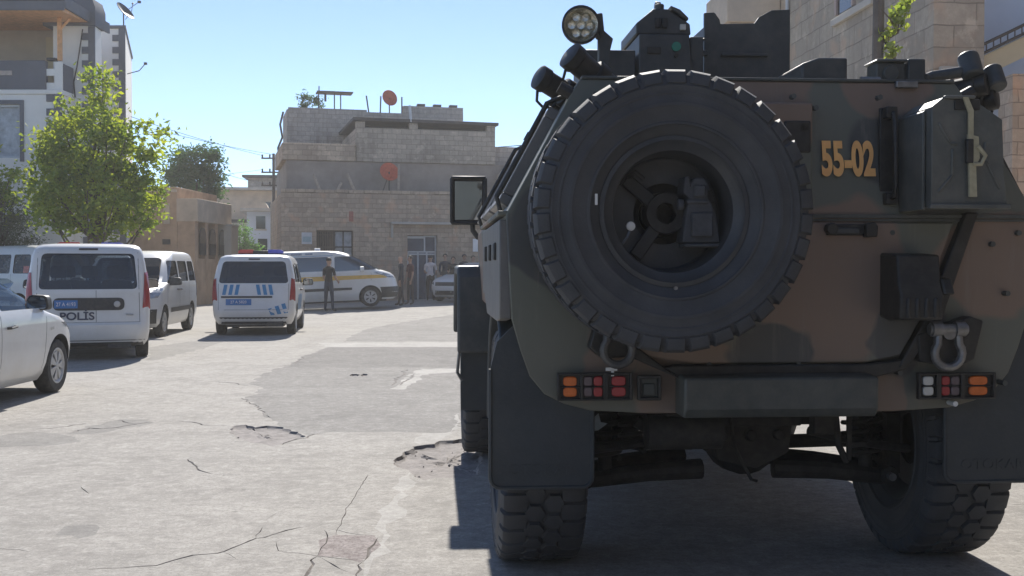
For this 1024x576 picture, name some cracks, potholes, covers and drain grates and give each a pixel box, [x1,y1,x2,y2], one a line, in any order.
pothole [230,425,305,446]
pothole [393,439,483,480]
crack [88,477,377,576]
crack [225,357,304,418]
